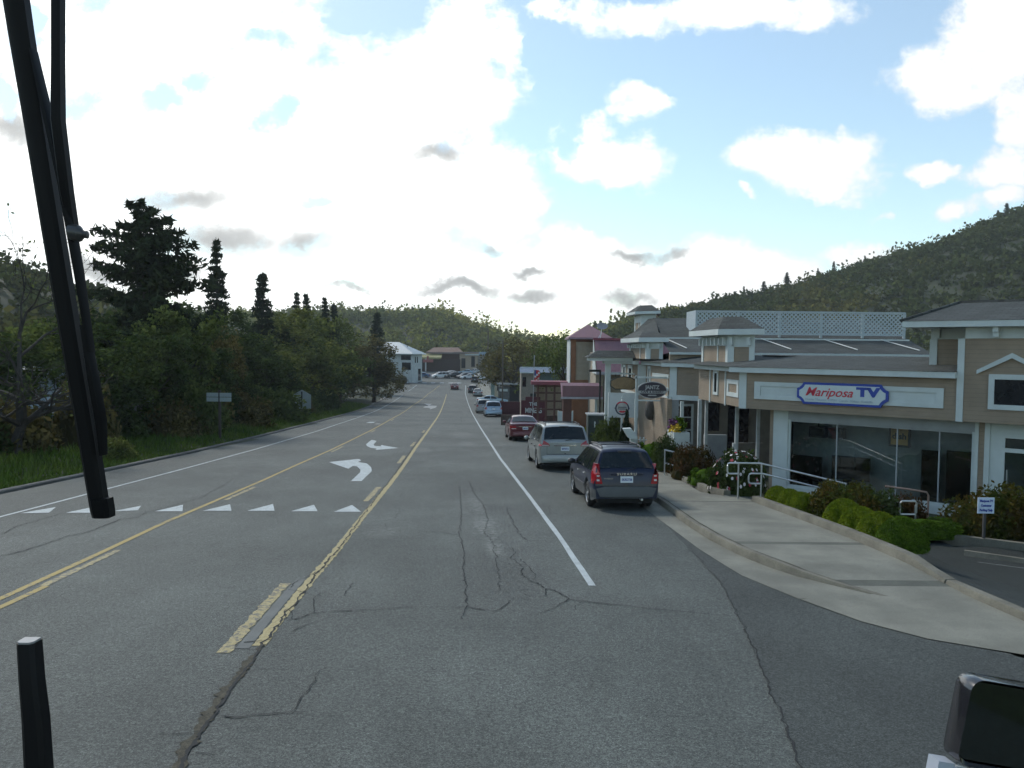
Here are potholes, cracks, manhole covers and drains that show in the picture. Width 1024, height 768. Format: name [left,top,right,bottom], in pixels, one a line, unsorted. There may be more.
crack [363,481,730,619]
